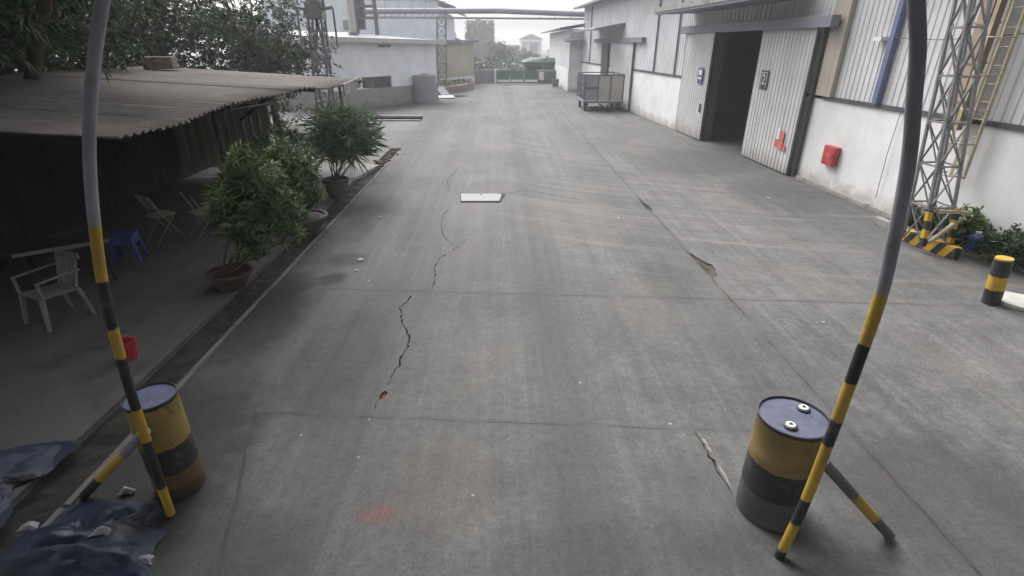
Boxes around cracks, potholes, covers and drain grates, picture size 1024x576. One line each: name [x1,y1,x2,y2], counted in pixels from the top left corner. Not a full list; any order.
crack [694,431,733,496]
crack [374,290,417,409]
manhole cover [460,193,505,202]
crack [432,211,465,288]
